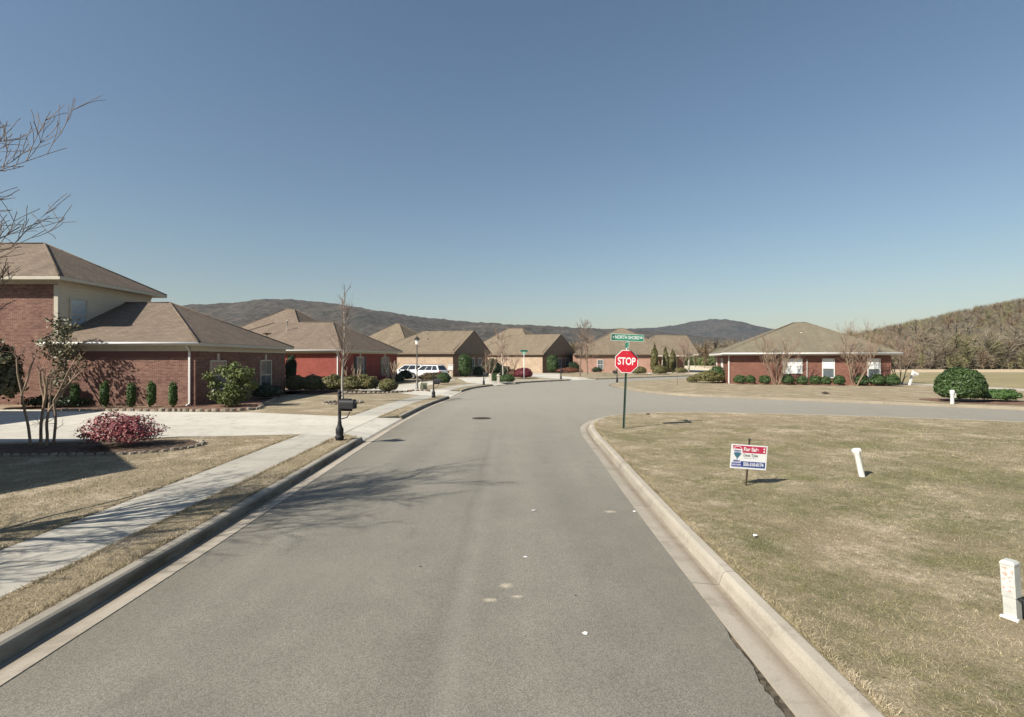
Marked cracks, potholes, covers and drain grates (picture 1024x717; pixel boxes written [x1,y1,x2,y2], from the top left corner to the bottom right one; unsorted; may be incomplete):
crack [718,618,796,717]
